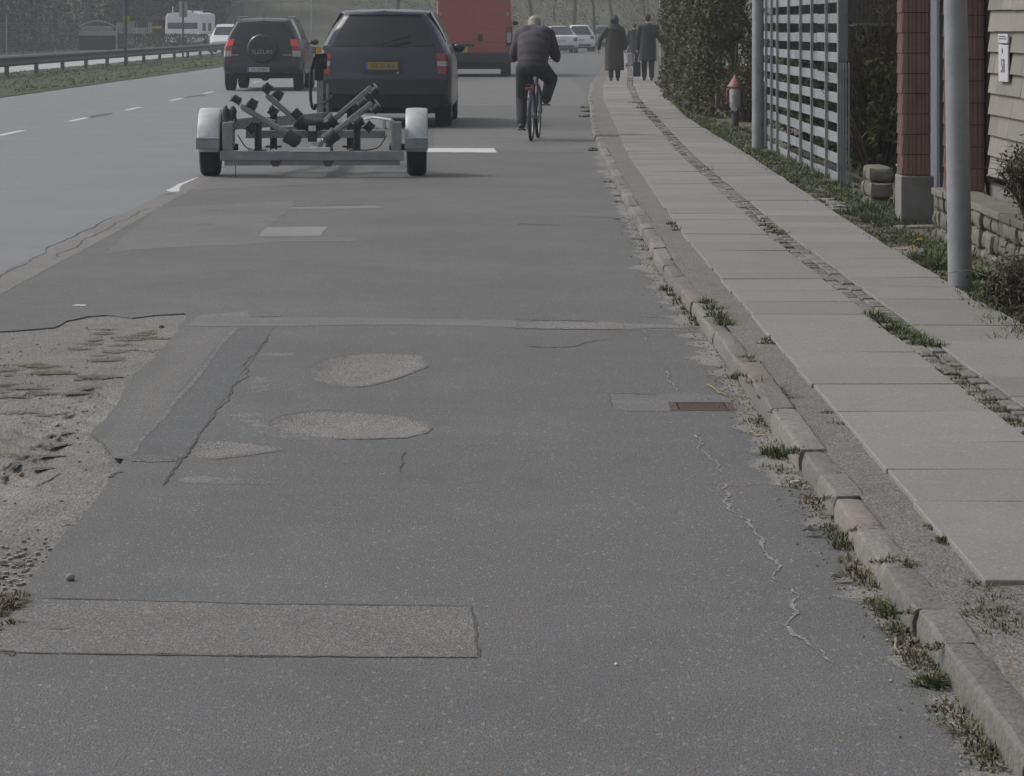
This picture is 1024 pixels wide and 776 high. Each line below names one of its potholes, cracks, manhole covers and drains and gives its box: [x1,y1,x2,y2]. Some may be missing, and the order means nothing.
crack [357,428,432,472]
crack [0,193,172,278]
crack [693,432,832,662]
